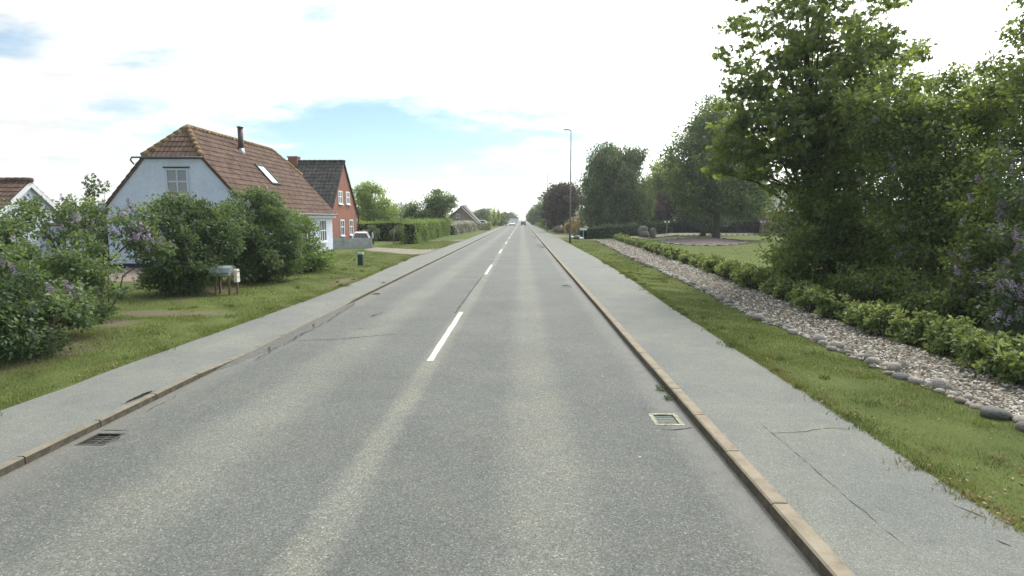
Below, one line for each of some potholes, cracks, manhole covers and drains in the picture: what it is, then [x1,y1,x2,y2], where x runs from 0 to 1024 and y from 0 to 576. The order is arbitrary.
crack [765,427,928,565]
crack [257,302,393,359]
